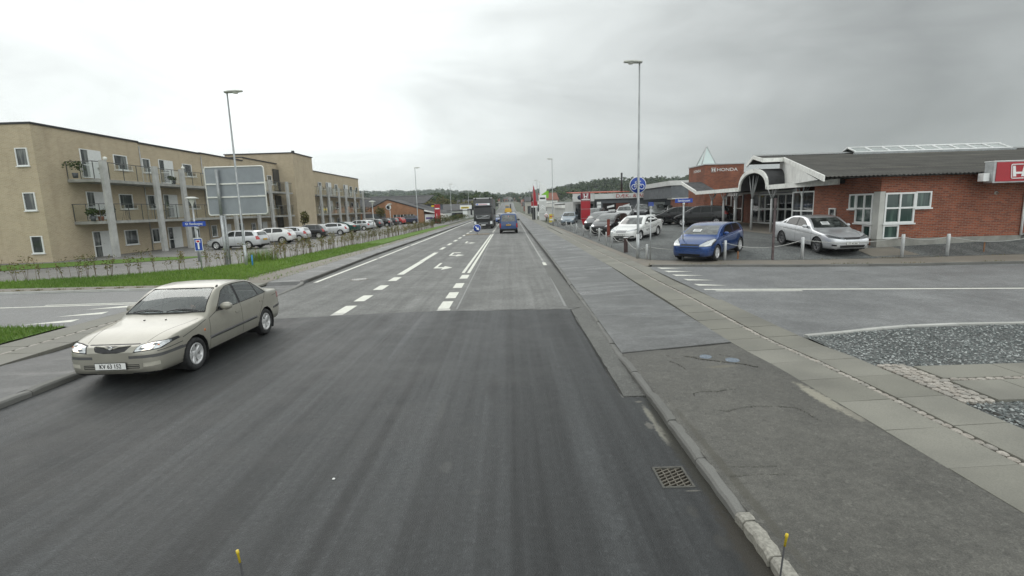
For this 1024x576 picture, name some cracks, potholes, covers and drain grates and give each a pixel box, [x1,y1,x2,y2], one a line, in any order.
drain grate [651,466,696,488]
